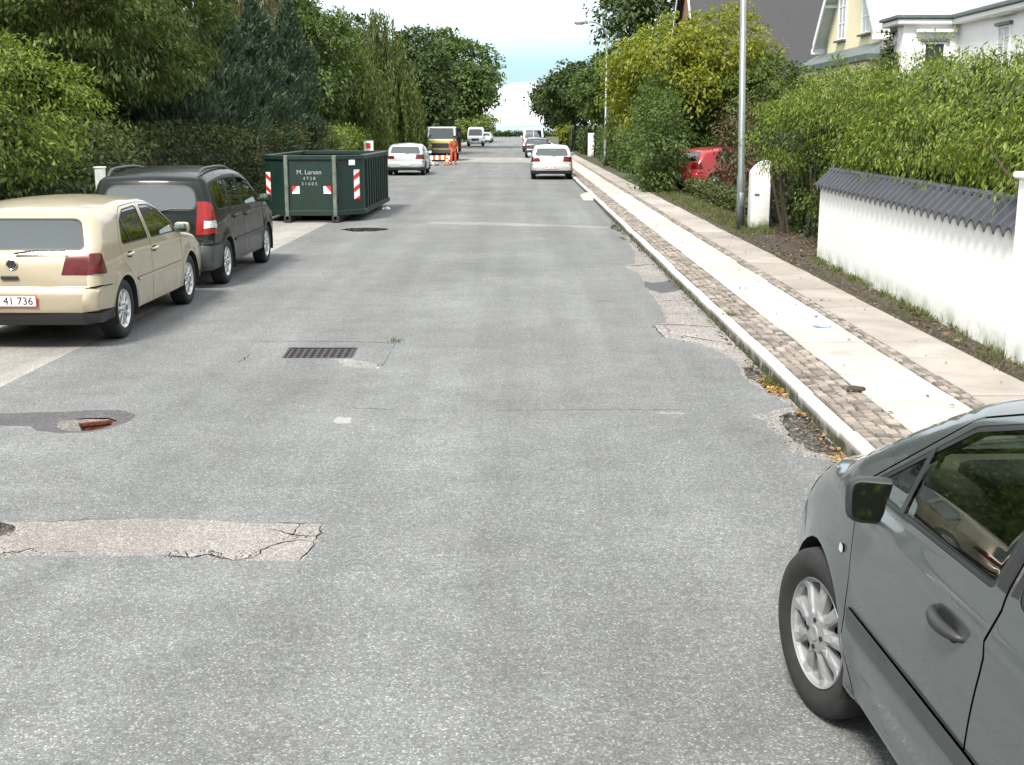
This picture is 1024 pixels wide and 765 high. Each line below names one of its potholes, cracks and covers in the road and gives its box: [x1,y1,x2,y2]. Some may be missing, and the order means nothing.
crack [236,341,395,365]
crack [168,522,324,561]
pothole [27,410,135,433]
pothole [779,412,840,455]
